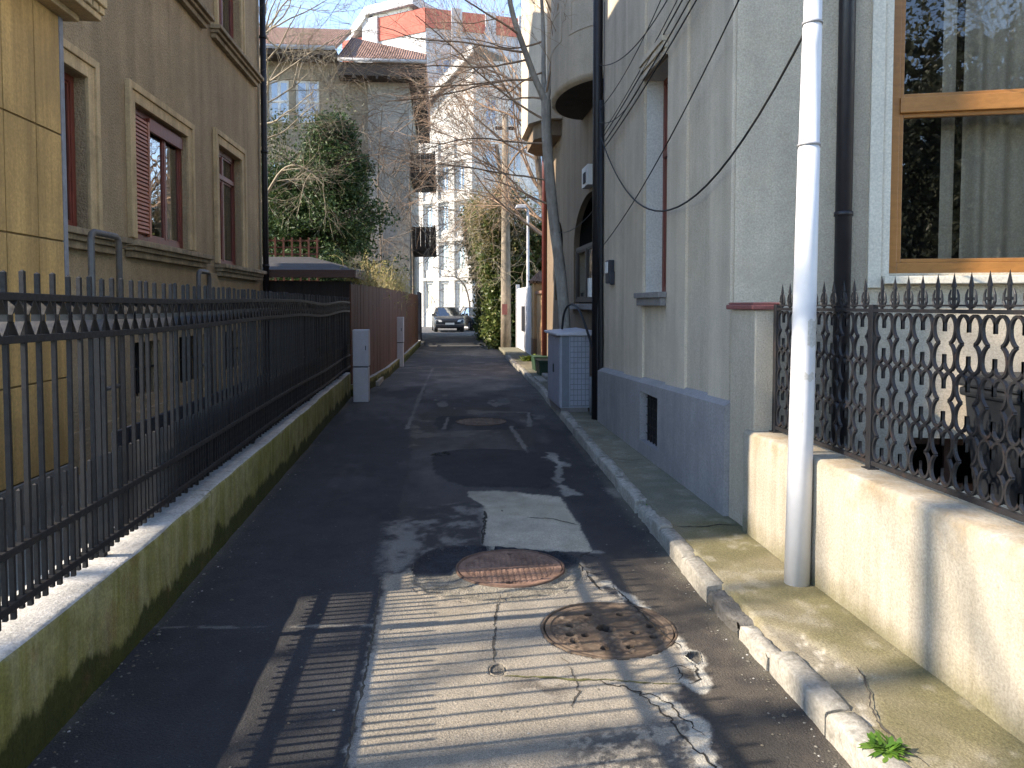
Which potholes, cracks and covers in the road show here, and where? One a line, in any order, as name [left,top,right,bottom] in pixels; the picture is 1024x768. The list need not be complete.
manhole cover [540,602,678,660]
manhole cover [455,417,507,426]
manhole cover [455,549,565,588]
crack [578,551,681,646]
pothole [684,651,702,665]
crack [561,657,581,706]
crack [856,666,928,765]
crack [600,680,717,768]
crack [670,665,701,684]
